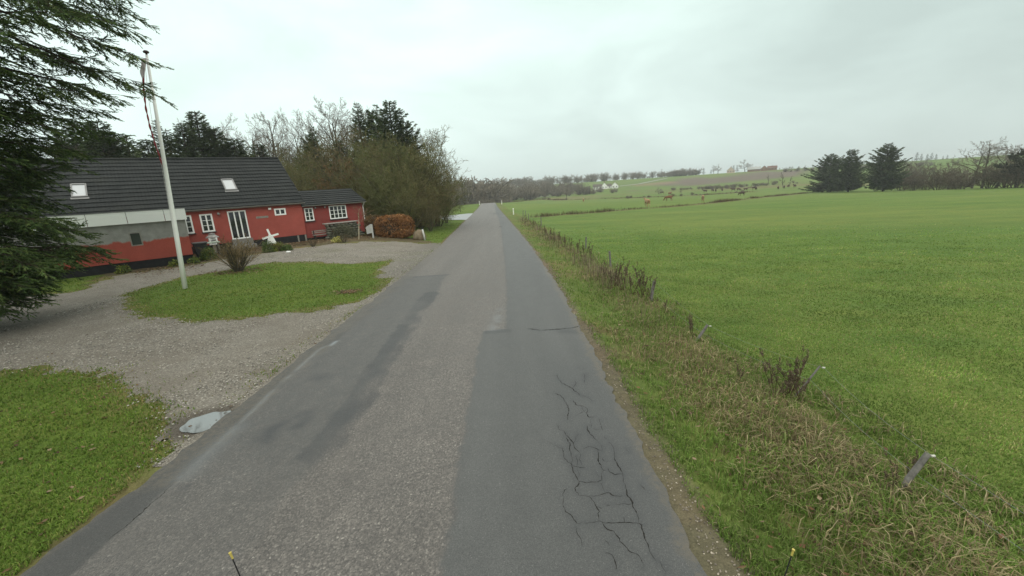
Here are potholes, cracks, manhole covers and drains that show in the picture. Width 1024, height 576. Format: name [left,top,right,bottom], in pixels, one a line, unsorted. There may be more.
crack [557,374,666,572]
